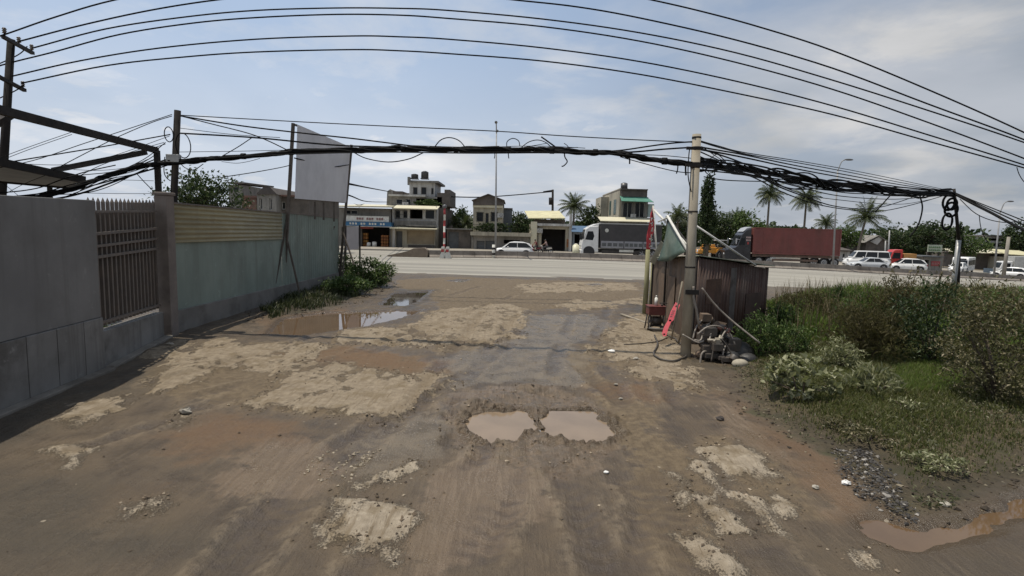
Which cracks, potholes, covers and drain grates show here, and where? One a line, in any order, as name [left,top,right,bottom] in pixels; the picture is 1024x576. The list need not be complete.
pothole [535,404,641,453]
pothole [443,397,545,455]
